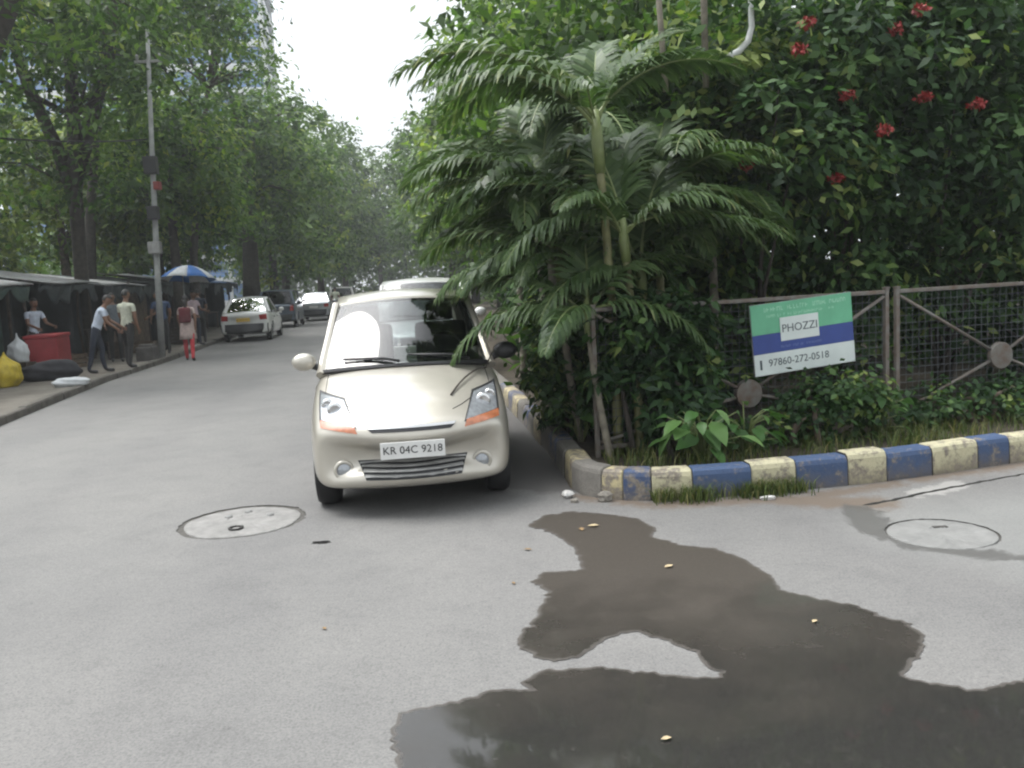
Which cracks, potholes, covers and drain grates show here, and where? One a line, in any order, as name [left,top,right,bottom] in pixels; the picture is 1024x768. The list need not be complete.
manhole cover [176,505,306,540]
manhole cover [884,519,1002,549]
